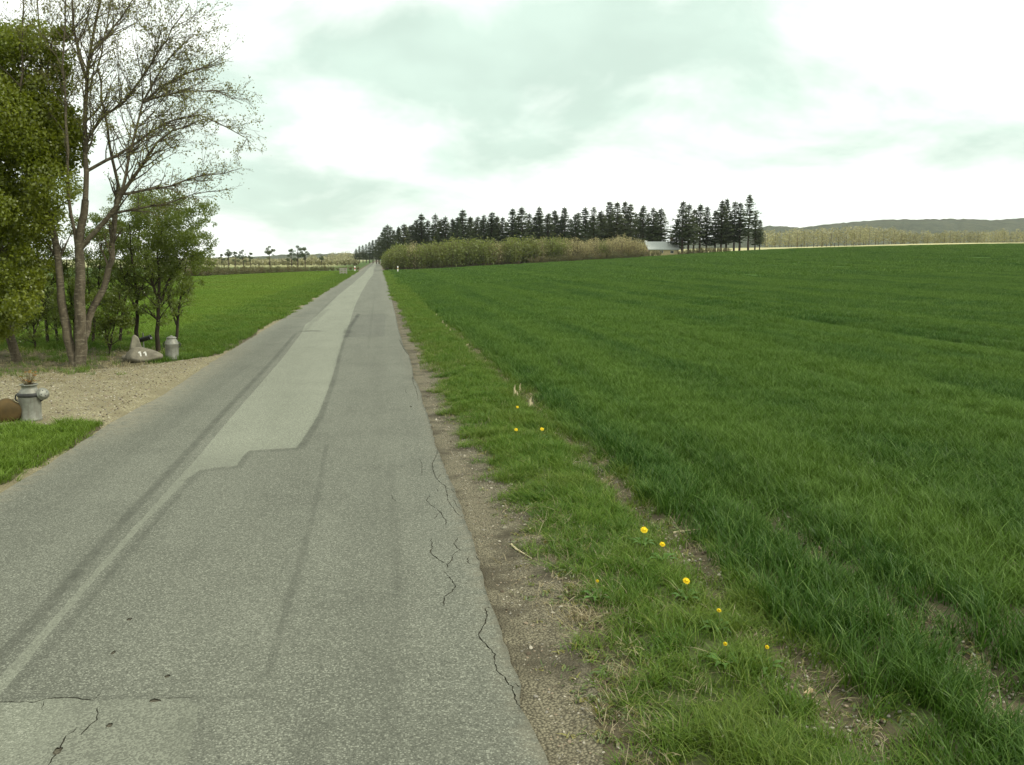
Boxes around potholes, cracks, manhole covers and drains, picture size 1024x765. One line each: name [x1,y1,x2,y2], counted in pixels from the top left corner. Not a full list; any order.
crack [10,694,100,763]
crack [478,607,520,706]
crack [421,449,477,606]
